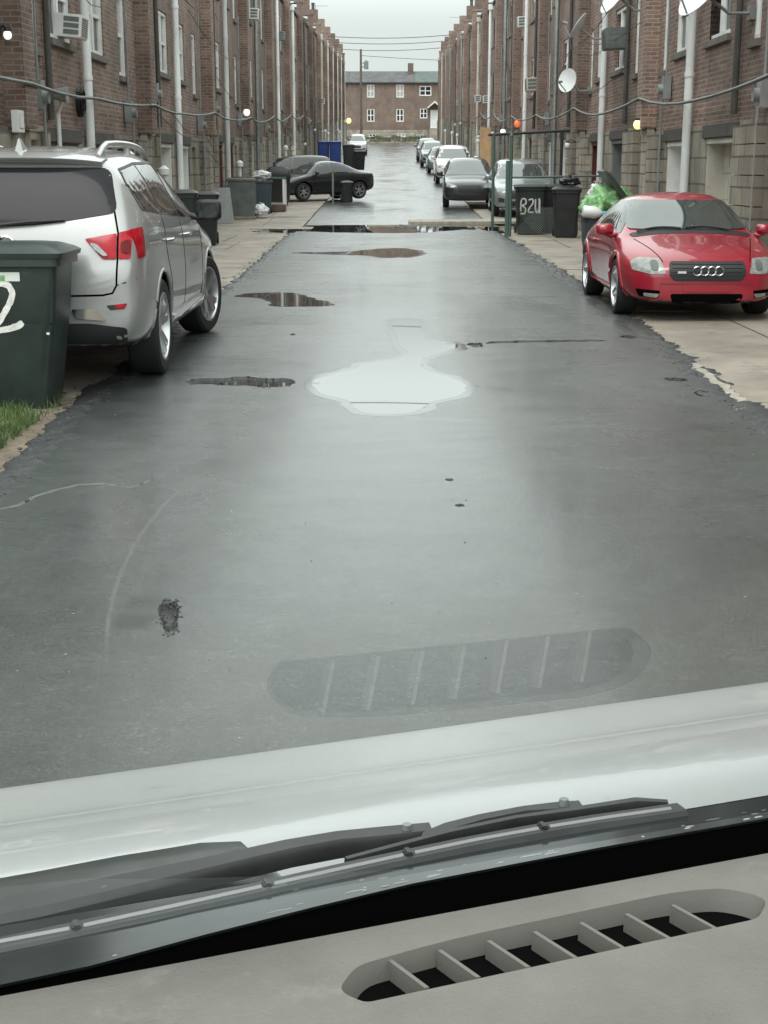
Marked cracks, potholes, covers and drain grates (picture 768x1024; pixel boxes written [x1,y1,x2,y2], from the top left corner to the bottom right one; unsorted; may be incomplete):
crack [0,476,155,509]
pothole [156,598,183,637]
